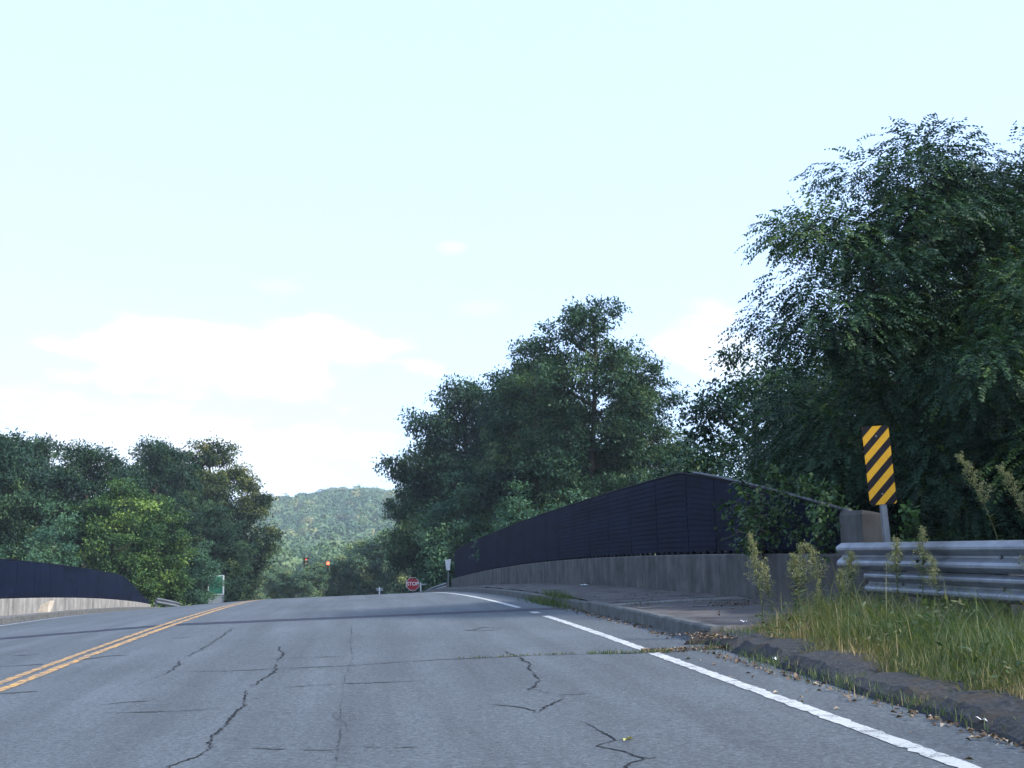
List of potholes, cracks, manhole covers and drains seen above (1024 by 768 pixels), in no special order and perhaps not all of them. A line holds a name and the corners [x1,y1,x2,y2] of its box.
crack [144,628,234,681]
crack [104,647,700,768]
